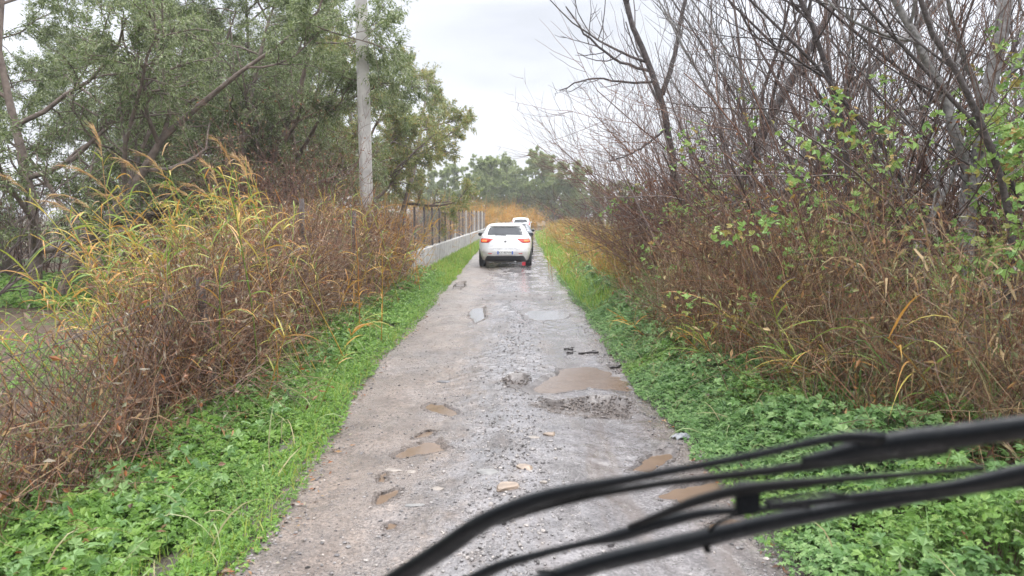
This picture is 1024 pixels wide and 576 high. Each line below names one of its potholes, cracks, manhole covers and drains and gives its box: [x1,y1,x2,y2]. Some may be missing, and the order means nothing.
pothole [410,429,438,440]
pothole [528,394,641,420]
pothole [420,402,463,418]
pothole [655,481,728,504]
pothole [467,307,487,324]
pothole [372,487,403,506]
pothole [375,471,390,484]
pothole [380,520,403,532]
pothole [388,436,454,460]
pothole [501,371,532,389]
pothole [625,446,680,473]
pothole [521,367,638,394]
